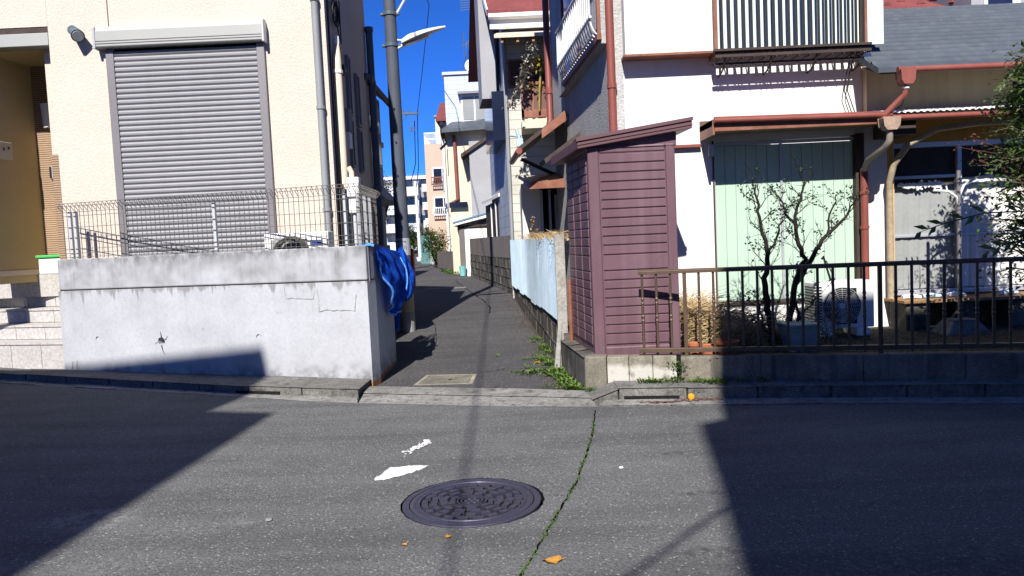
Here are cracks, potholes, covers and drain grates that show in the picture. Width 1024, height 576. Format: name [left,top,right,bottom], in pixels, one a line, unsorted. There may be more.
manhole cover [400,478,545,528]
crack [518,413,597,576]
